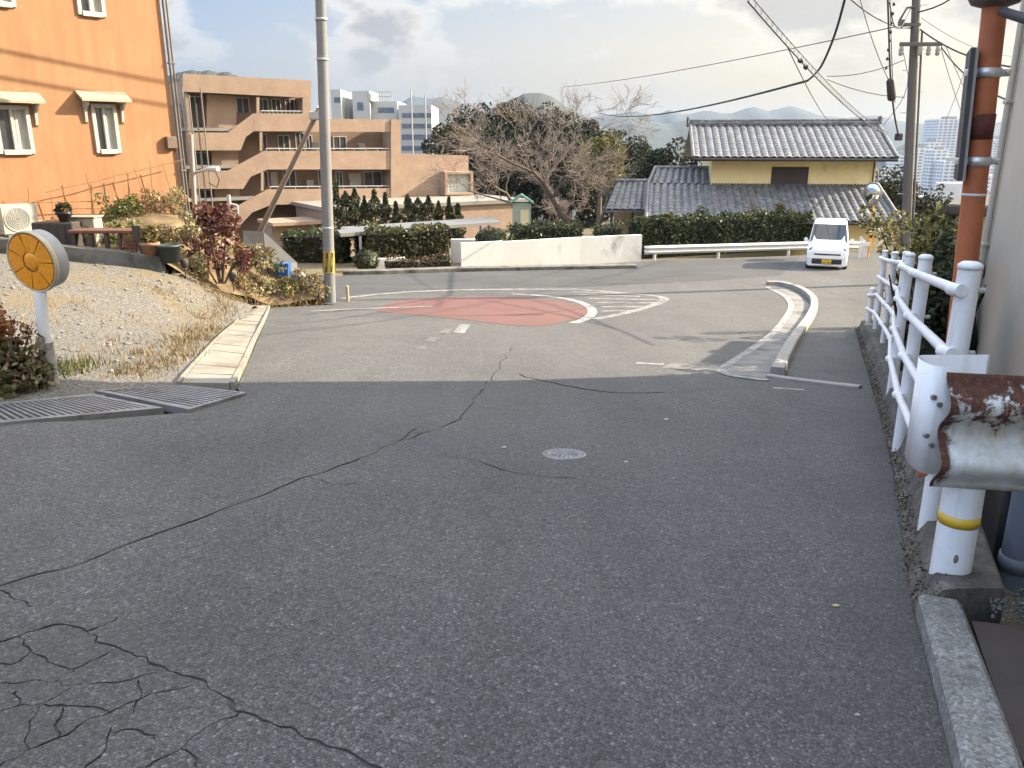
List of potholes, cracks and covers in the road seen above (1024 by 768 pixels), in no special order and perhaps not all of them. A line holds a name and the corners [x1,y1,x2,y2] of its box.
crack [0,349,511,768]
manhole cover [543,448,586,460]
drain grate [94,385,247,413]
drain grate [0,394,164,425]
